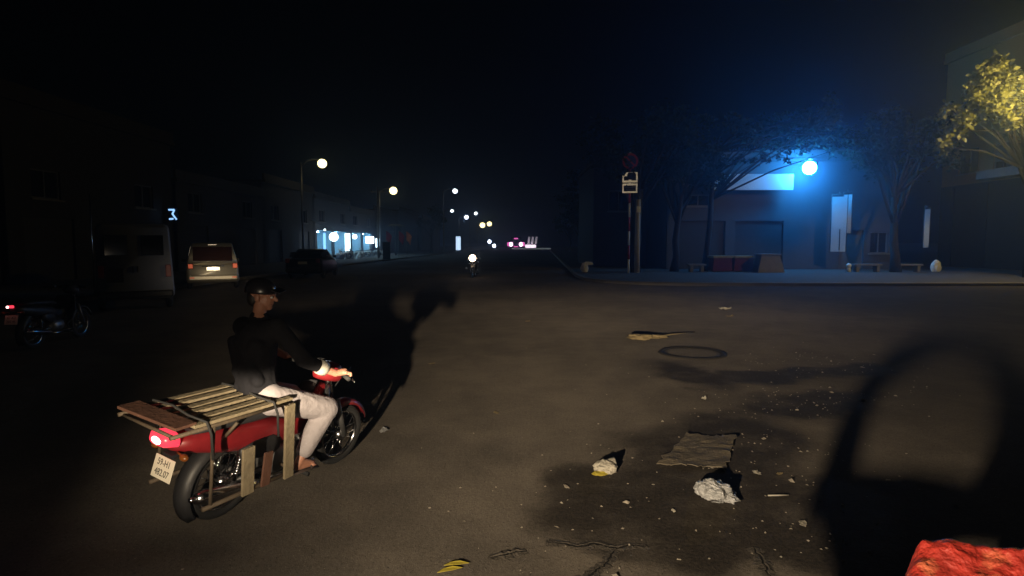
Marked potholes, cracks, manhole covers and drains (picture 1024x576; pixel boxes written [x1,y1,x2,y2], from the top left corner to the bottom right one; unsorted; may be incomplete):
manhole cover [658,347,727,360]
crack [746,547,778,576]
crack [545,539,650,576]
crack [488,547,528,561]
